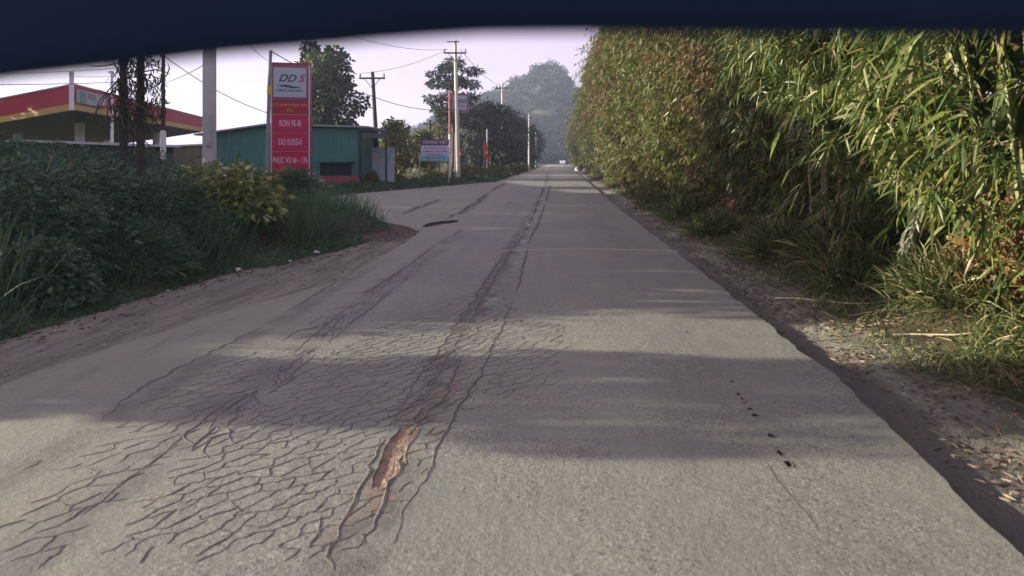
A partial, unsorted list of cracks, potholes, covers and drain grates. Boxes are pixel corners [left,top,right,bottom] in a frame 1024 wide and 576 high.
crack [763,458,818,529]
pothole [370,426,419,491]
crack [0,173,571,570]
